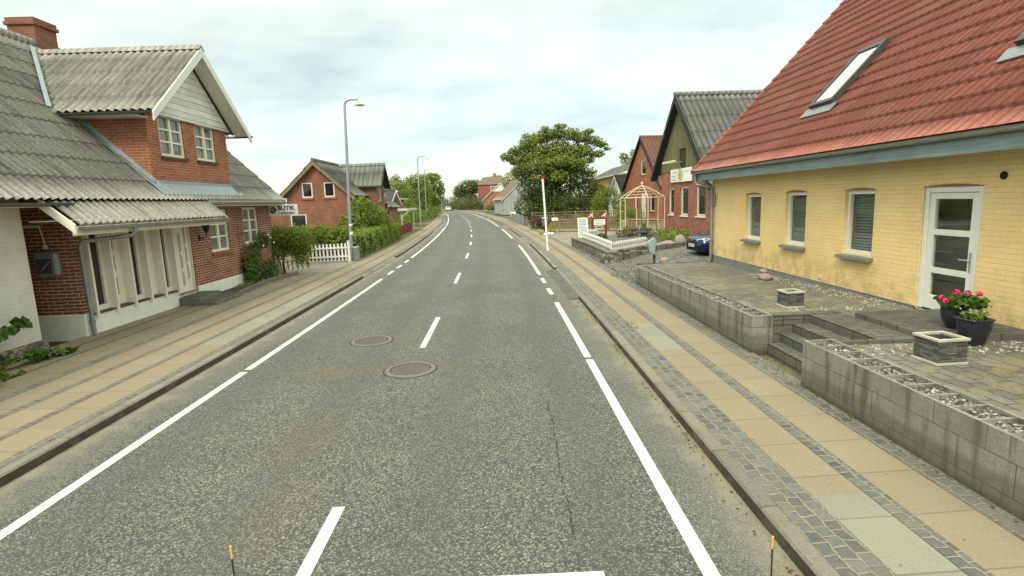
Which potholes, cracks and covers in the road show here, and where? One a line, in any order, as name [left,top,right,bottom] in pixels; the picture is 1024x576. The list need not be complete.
manhole cover [383,362,438,378]
manhole cover [349,336,394,347]
crack [547,403,579,566]
